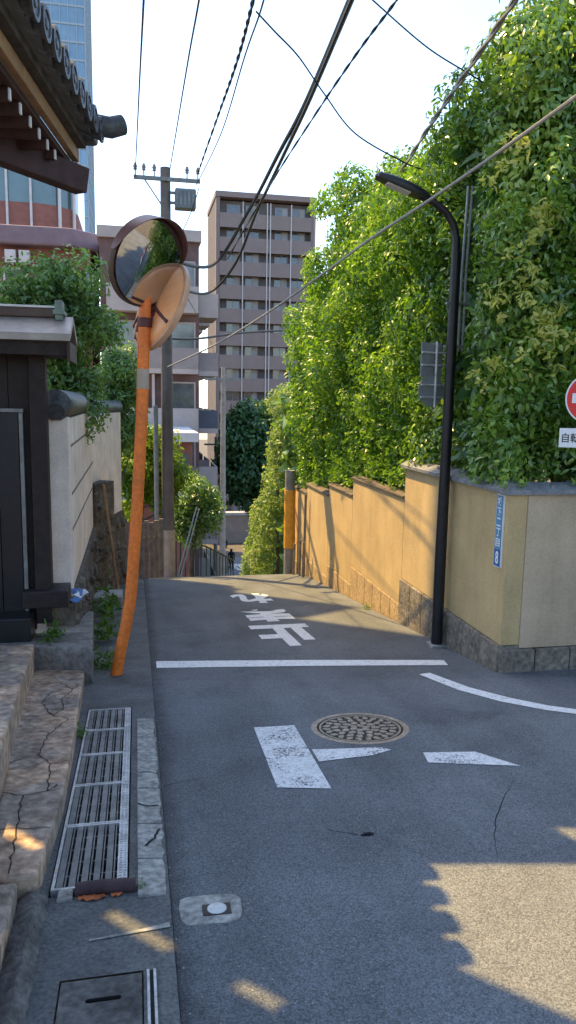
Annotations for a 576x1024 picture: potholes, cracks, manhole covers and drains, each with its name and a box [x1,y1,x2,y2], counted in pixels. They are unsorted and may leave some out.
manhole cover [311,713,409,744]
drain grate [80,728,131,755]
drain grate [50,821,129,898]
crack [494,784,512,856]
drain grate [73,752,130,786]
drain grate [64,781,129,828]
drain grate [85,707,131,731]
